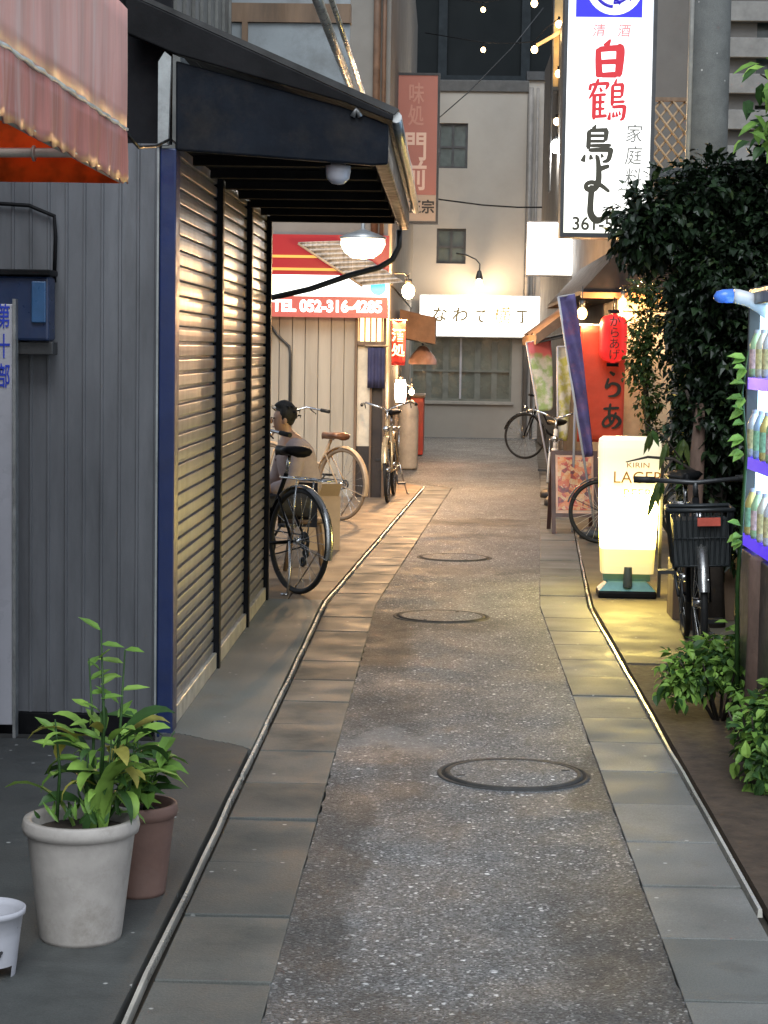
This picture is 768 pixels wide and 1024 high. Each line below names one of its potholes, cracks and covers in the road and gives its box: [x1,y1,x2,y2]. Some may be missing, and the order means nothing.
manhole cover [417,553,492,562]
manhole cover [437,758,591,792]
manhole cover [393,610,490,623]
